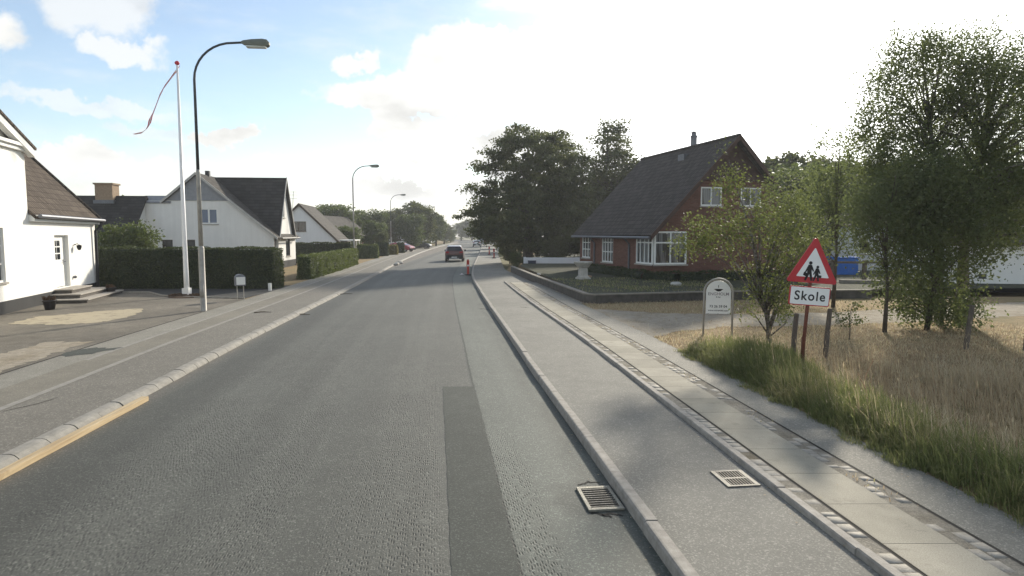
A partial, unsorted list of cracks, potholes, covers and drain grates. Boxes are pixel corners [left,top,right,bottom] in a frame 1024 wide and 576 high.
drain grate [576,485,625,512]
drain grate [710,470,761,488]
